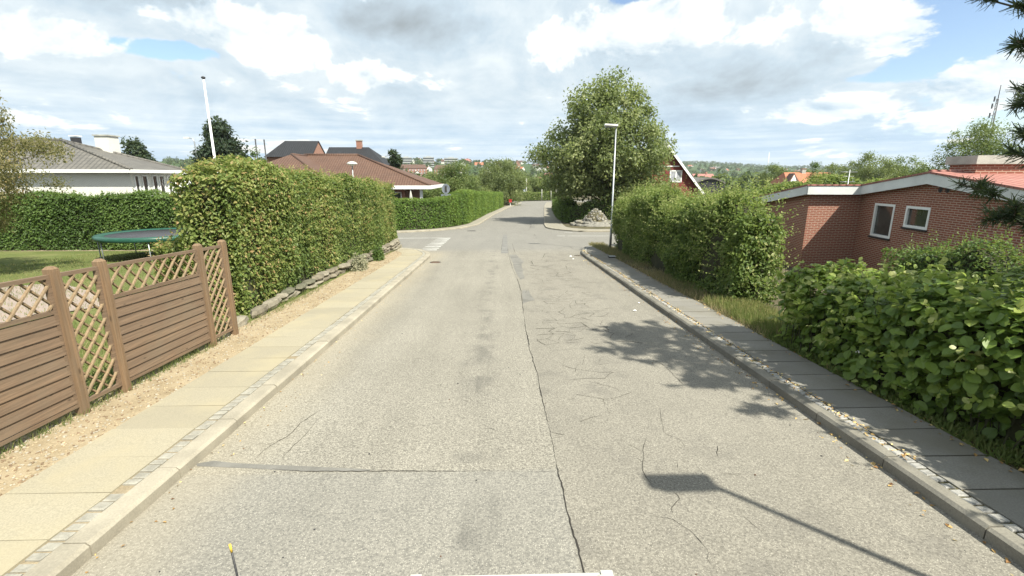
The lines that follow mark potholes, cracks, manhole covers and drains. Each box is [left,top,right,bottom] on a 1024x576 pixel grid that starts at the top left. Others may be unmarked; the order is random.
crack [525,250,639,349]
crack [197,411,542,472]
